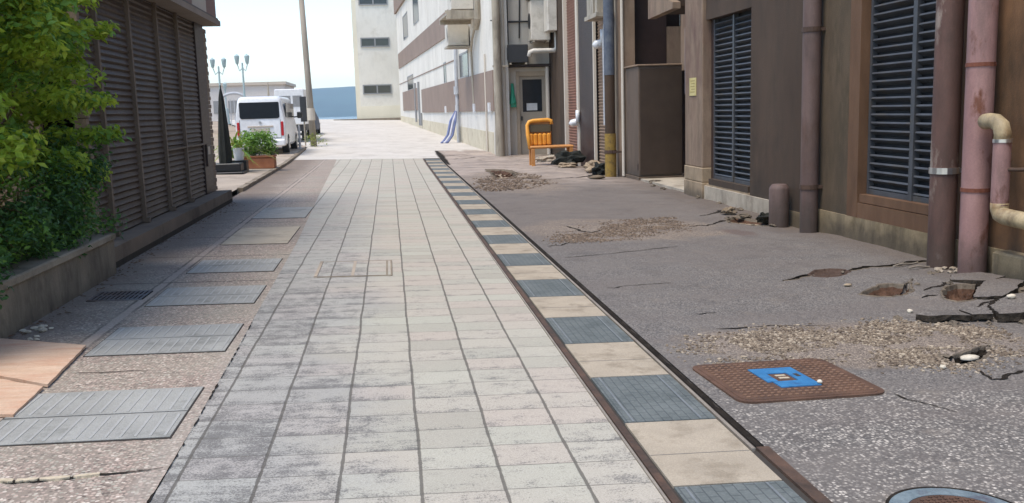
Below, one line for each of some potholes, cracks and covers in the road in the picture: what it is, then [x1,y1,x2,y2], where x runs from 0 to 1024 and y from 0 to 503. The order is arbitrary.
crack [976,299,998,320]
pothole [808,268,851,278]
manhole cover [693,358,884,404]
pothole [858,278,915,297]
manhole cover [885,486,1012,503]
manhole cover [314,260,392,278]
pothole [940,283,982,302]
crack [980,370,1024,379]
crack [551,226,678,257]
crack [841,260,927,274]
drain grate [86,290,153,302]
